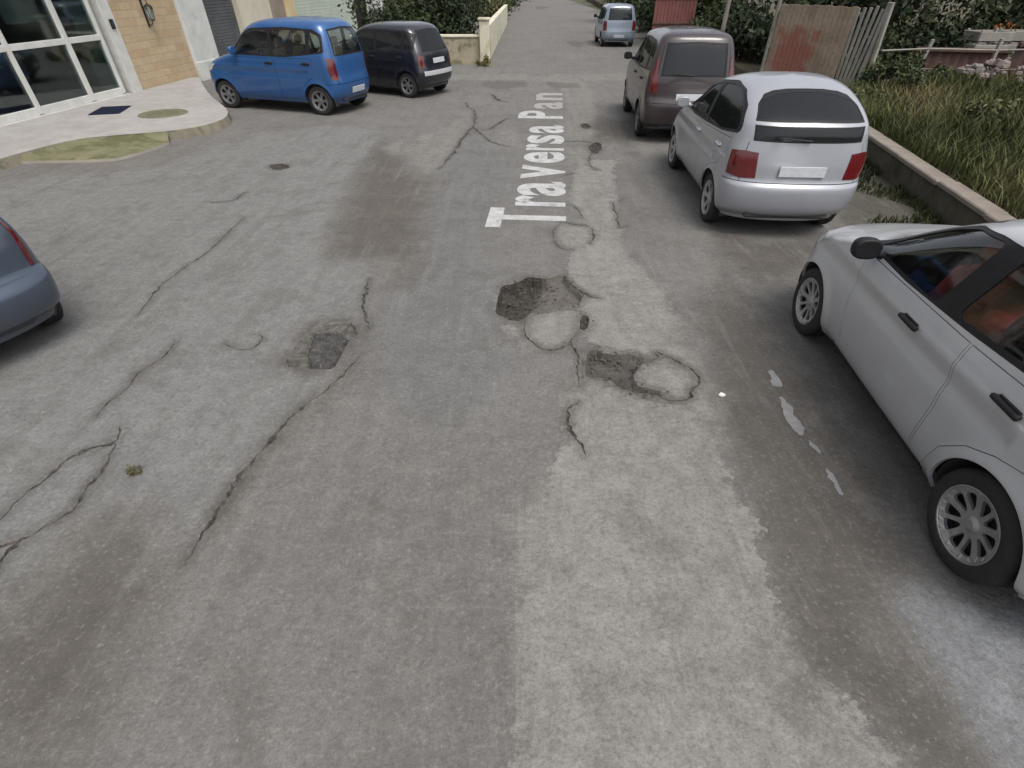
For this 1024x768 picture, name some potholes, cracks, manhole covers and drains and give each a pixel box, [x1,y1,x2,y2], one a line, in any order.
crack [137,194,244,316]
crack [438,94,510,169]
crack [361,281,370,329]
pothole [495,275,582,321]
crack [0,344,174,568]
crack [523,321,586,455]
crack [223,334,263,350]
pothole [585,350,661,395]
crack [185,358,358,563]
pothole [588,142,602,154]
